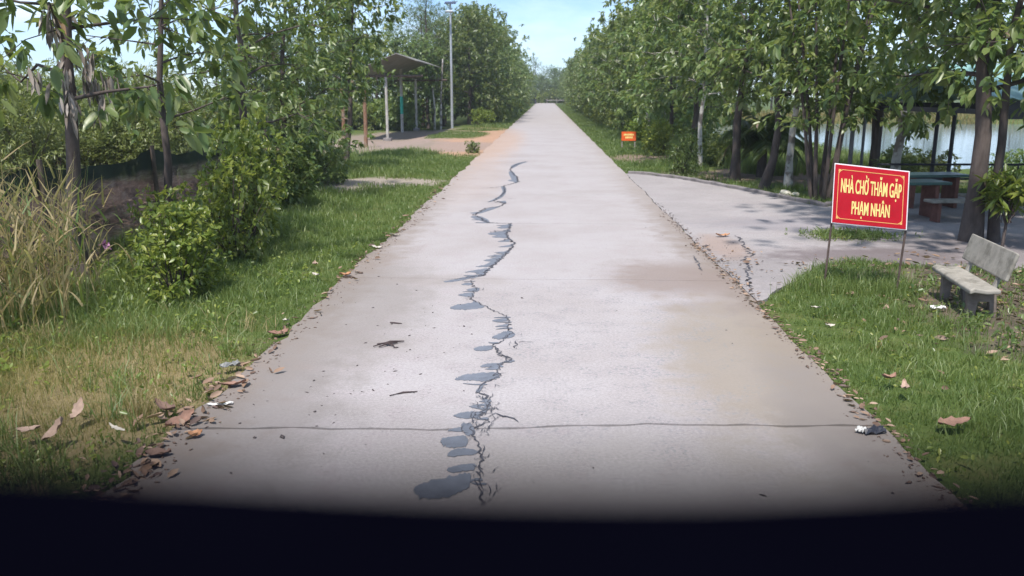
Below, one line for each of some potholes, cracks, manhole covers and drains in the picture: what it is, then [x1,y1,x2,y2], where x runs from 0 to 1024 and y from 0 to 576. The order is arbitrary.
crack [440,161,532,459]
crack [736,236,755,287]
